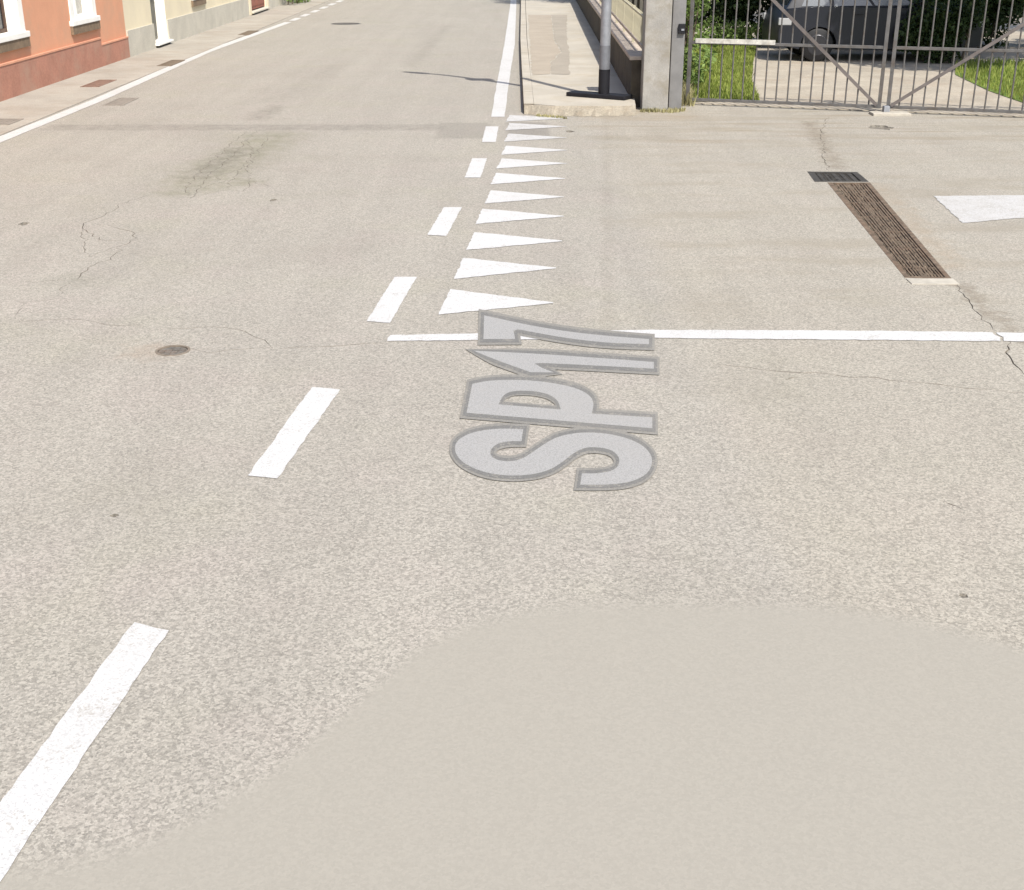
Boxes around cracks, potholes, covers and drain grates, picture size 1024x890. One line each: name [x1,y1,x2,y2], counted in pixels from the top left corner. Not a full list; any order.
manhole cover [155,345,190,356]
crack [4,194,152,326]
crack [958,286,1024,374]
drain grate [807,171,869,182]
crack [718,364,1016,393]
